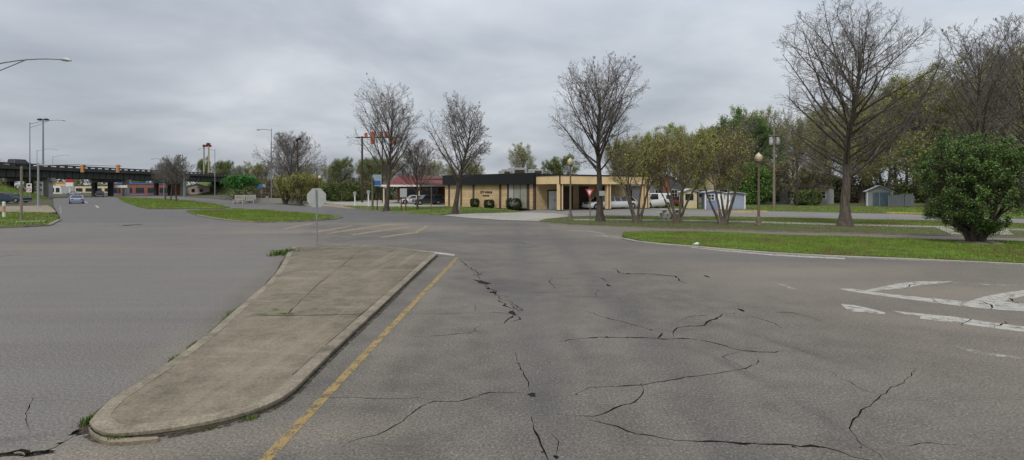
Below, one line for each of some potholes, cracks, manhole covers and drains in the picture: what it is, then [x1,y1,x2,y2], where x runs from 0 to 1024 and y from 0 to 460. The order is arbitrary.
crack [428,261,523,337]
crack [301,353,530,445]
crack [531,417,559,460]
crack [559,311,915,460]
